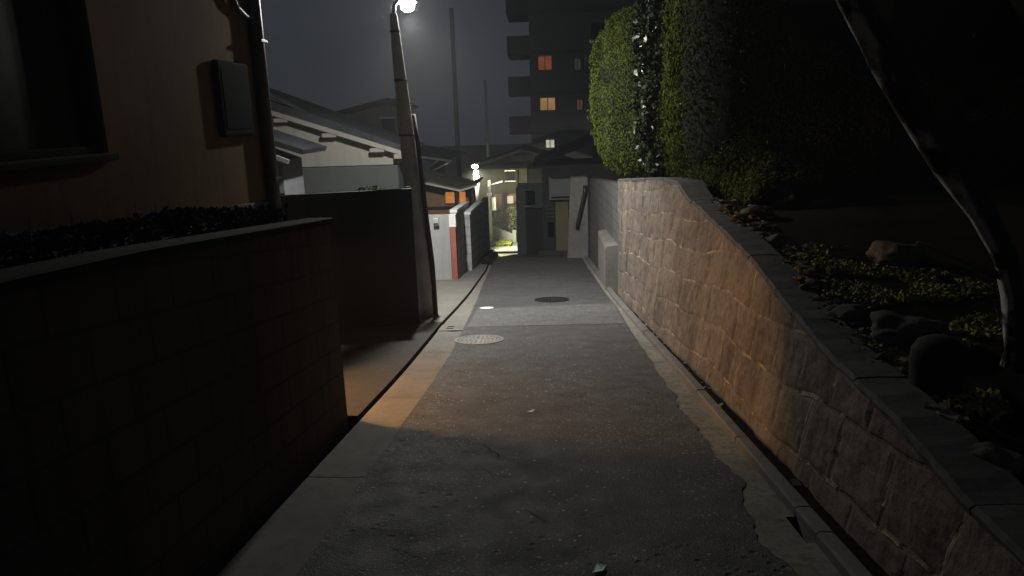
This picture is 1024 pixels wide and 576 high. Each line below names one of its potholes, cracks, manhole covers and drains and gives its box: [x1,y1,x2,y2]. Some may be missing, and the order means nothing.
manhole cover [455,335,504,345]
